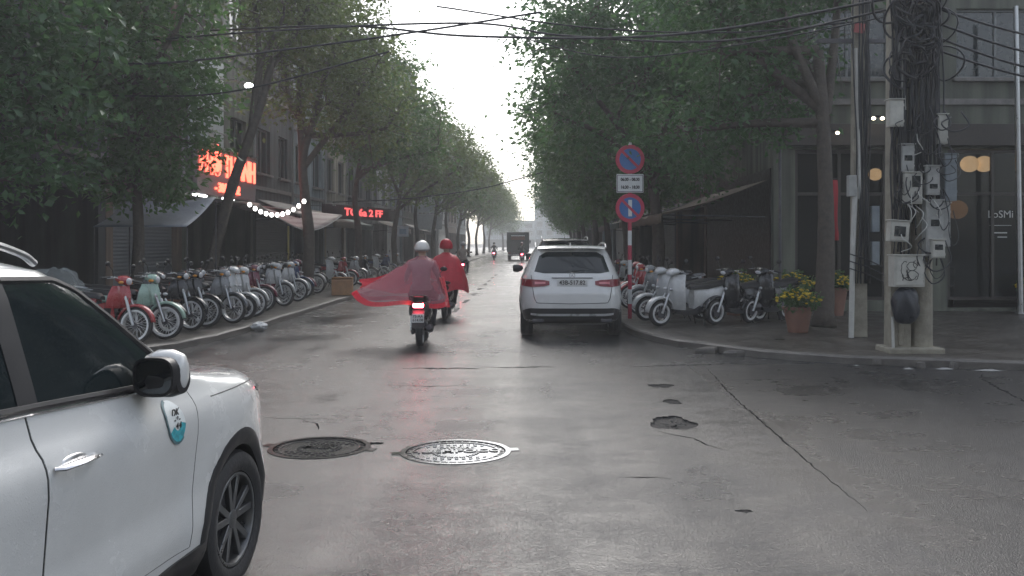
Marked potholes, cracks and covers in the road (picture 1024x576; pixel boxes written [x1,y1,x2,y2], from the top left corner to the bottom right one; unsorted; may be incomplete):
manhole cover [392,439,519,465]
crack [980,375,1024,402]
pothole [650,416,698,430]
manhole cover [263,436,377,459]
